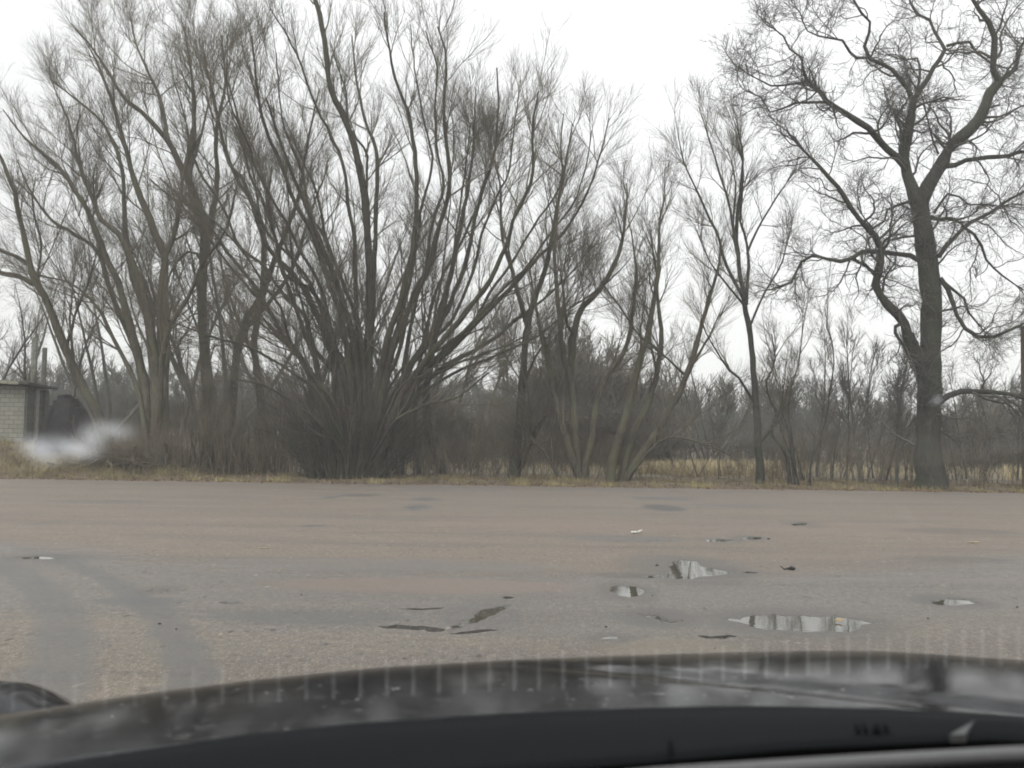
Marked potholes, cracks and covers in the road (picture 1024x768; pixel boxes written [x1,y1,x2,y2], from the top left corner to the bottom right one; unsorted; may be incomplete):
pothole [718,613,874,633]
pothole [448,603,512,630]
pothole [929,597,977,606]
pothole [609,585,645,597]
pothole [643,559,731,579]
